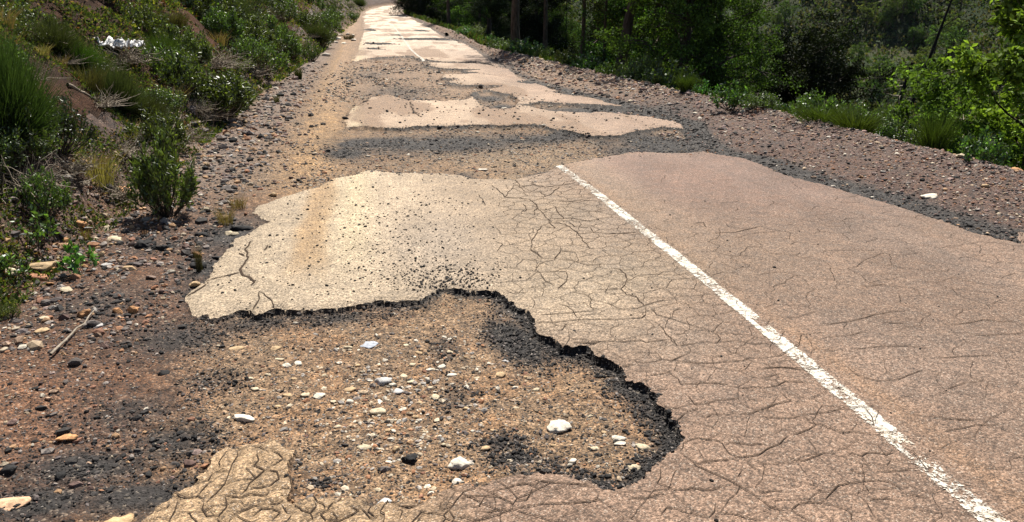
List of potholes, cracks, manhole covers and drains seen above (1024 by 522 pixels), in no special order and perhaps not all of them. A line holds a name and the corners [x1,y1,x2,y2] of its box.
pothole [327,55,509,119]
pothole [310,123,718,187]
pothole [471,89,522,109]
crack [144,165,1024,522]
pothole [170,288,685,507]
